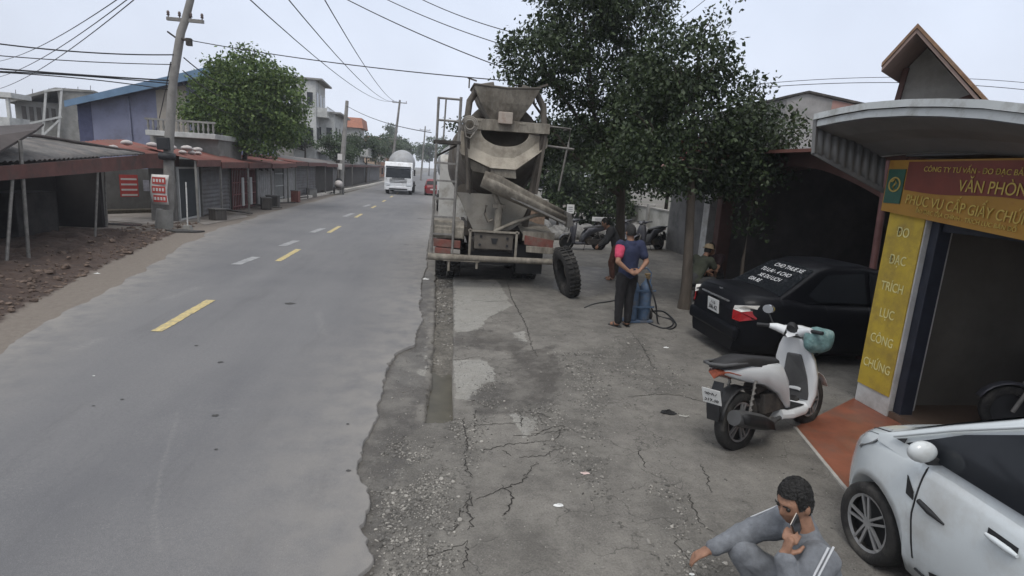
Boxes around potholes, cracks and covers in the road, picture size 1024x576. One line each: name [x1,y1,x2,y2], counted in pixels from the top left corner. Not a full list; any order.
crack [429,410,570,569]
crack [688,465,712,531]
crack [478,283,538,357]
